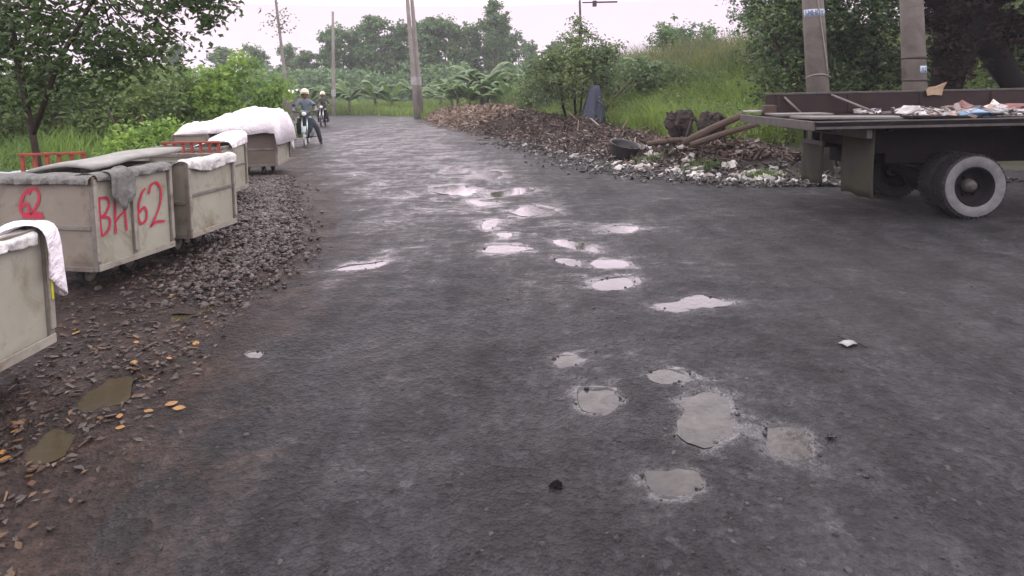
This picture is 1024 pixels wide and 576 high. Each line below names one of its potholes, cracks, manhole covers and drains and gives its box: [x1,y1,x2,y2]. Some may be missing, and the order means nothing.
pothole [552,355,579,368]
pothole [761,422,815,461]
pothole [591,276,636,291]
pothole [429,184,479,196]
pothole [647,368,692,385]
pothole [606,224,640,233]
pothole [551,257,584,266]
pothole [641,467,706,499]
pothole [547,238,604,253]
pothole [336,261,387,271]
pothole [510,205,562,217]
pothole [481,244,534,254]
